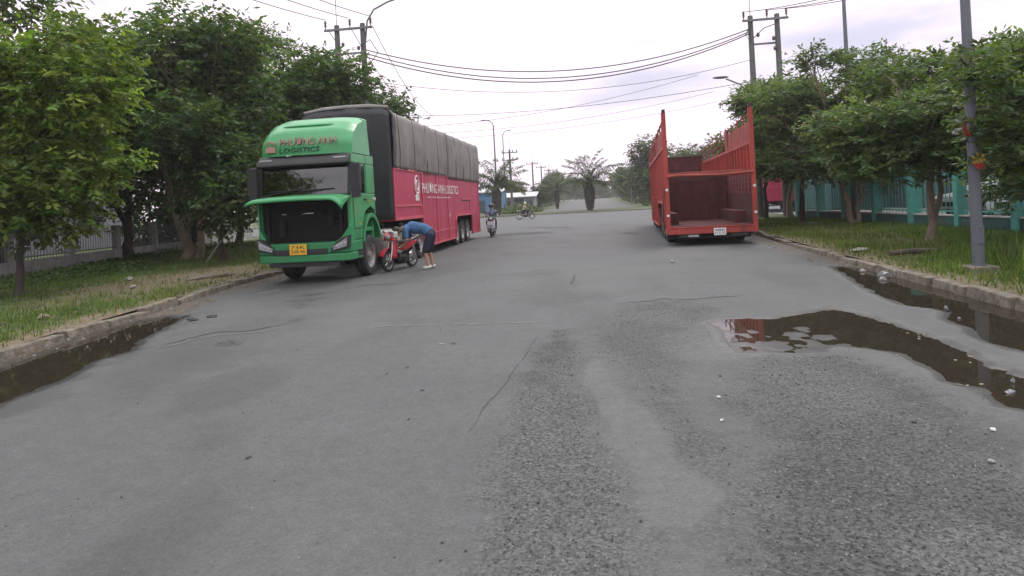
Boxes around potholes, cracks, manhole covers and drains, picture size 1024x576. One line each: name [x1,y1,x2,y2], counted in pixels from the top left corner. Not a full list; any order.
crack [159,324,283,348]
crack [350,322,538,430]
